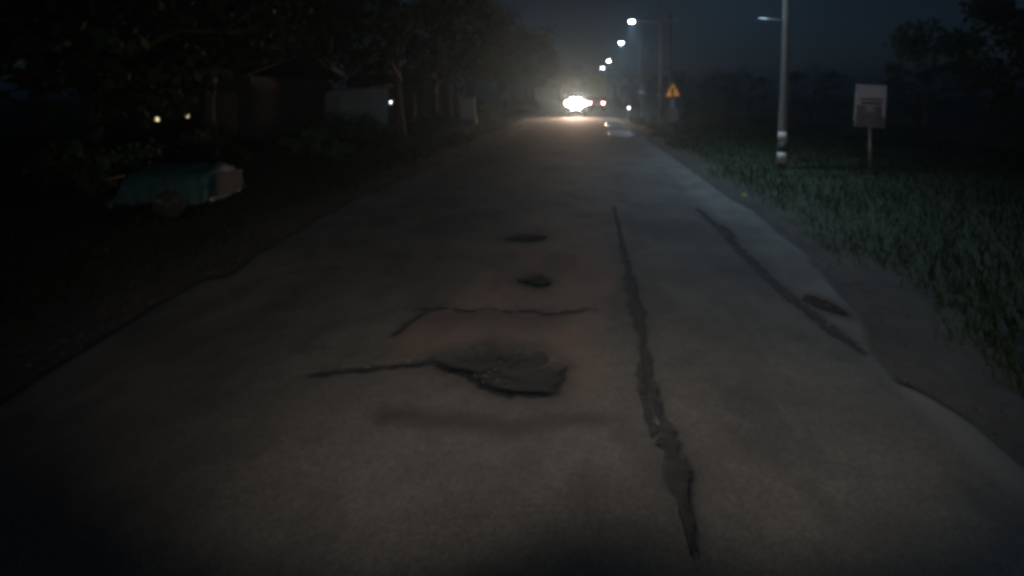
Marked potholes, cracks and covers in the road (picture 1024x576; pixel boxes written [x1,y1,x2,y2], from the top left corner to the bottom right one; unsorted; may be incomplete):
pothole [505,234,547,242]
pothole [803,295,850,317]
pothole [517,273,551,287]
crack [307,355,436,377]
pothole [430,343,568,397]
crack [391,206,868,560]
